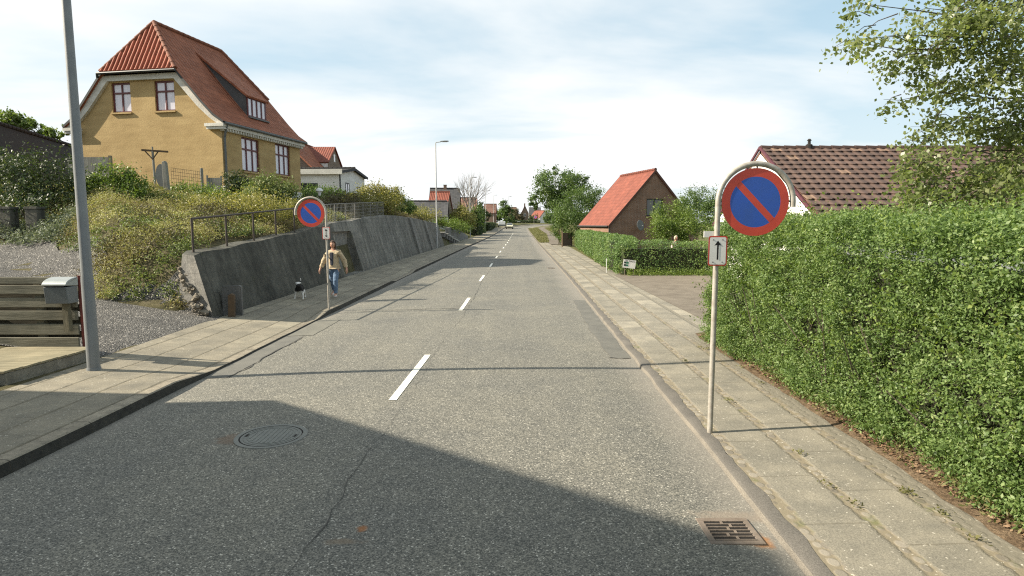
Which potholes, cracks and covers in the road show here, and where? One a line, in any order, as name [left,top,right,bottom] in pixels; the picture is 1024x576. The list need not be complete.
crack [285,265,493,576]
drain grate [695,518,766,546]
manhole cover [233,424,308,449]
